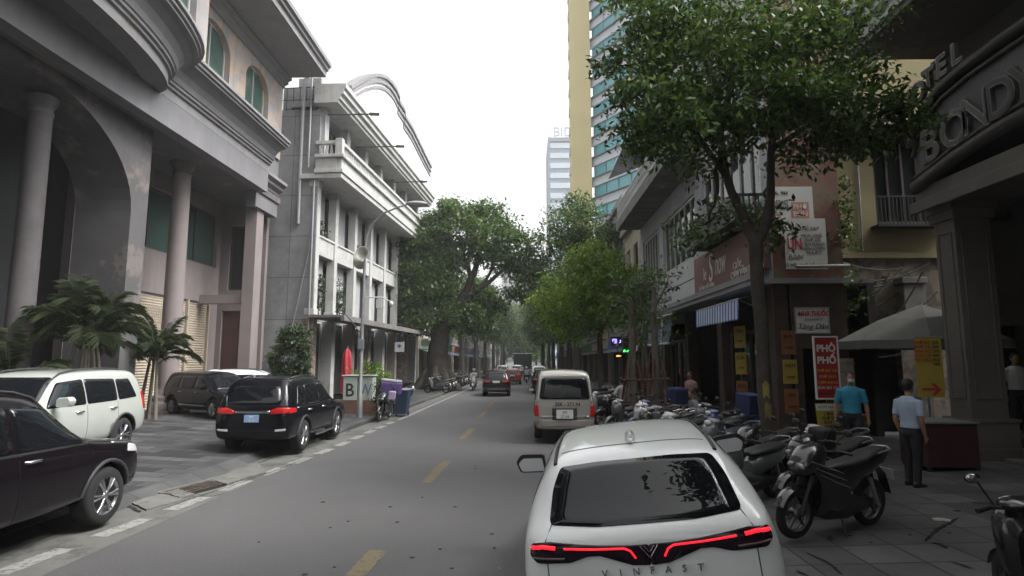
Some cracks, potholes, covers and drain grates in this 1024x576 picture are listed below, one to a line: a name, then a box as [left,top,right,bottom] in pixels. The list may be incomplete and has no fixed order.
crack [925,518,975,569]
drain grate [157,479,235,495]
